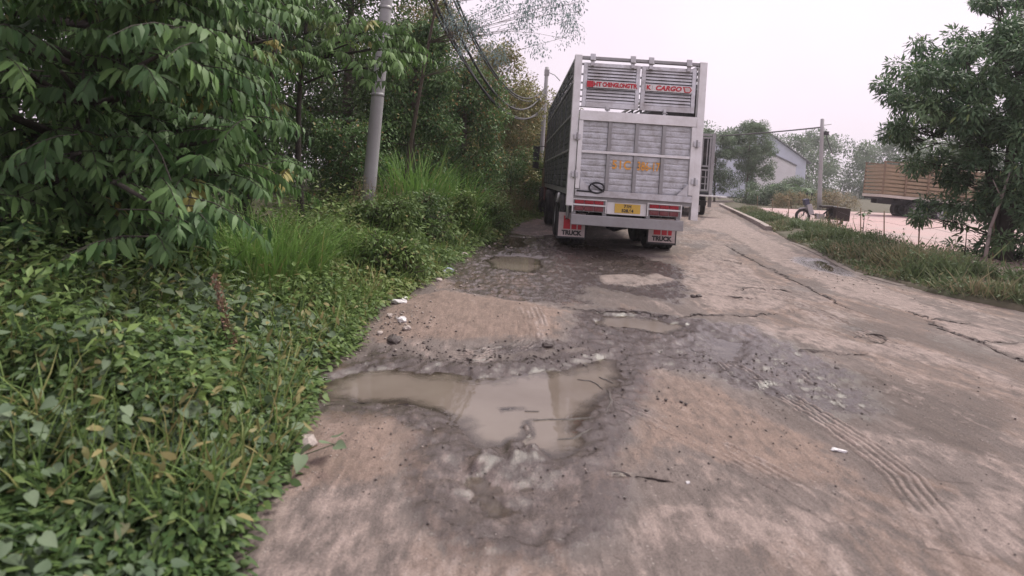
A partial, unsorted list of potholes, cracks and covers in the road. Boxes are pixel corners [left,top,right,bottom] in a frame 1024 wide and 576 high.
pothole [802,258,844,274]
crack [905,311,1024,361]
pothole [305,351,636,471]
pothole [587,312,698,338]
pothole [476,253,552,273]
